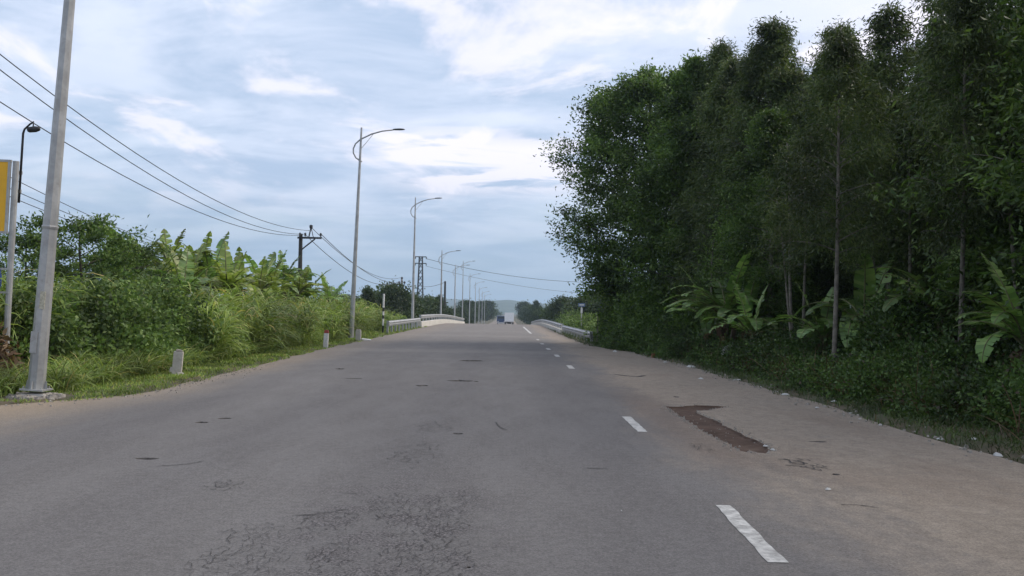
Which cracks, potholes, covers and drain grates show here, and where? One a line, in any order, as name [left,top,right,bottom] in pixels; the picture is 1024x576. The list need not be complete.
crack [182,493,359,576]
crack [783,458,827,471]
